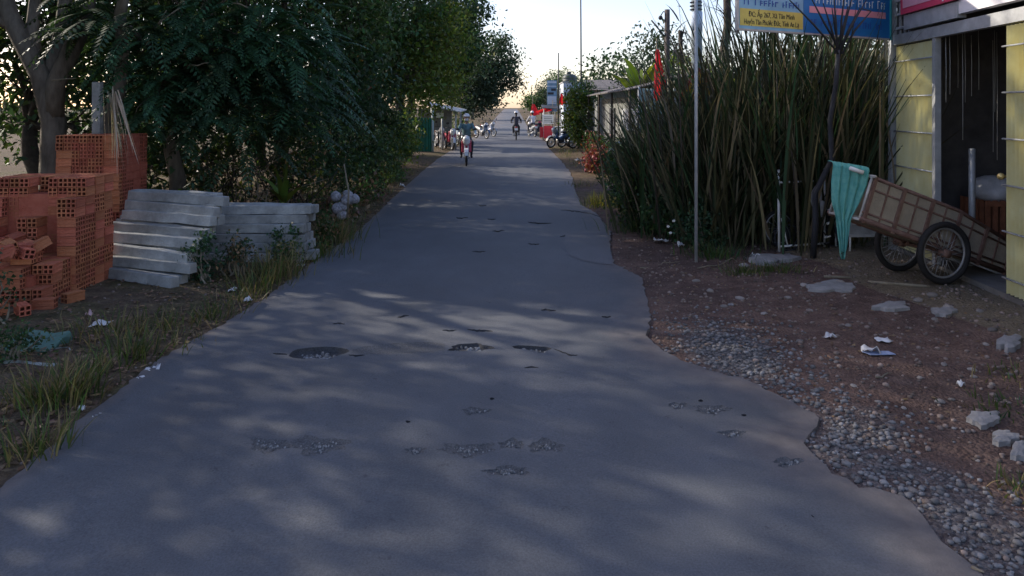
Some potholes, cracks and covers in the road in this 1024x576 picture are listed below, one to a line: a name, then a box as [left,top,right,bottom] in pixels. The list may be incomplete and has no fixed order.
pothole [289,347,349,359]
pothole [512,345,552,353]
pothole [448,343,494,351]
